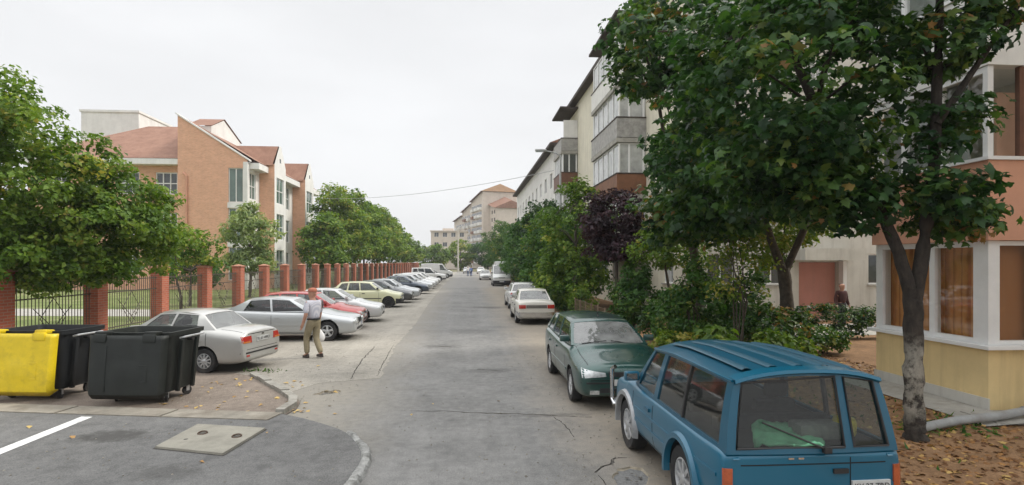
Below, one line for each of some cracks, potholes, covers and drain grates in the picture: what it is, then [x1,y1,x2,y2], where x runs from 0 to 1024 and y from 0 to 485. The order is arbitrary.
crack [595,457,625,485]
manhole cover [153,424,267,456]
crack [451,411,576,437]
